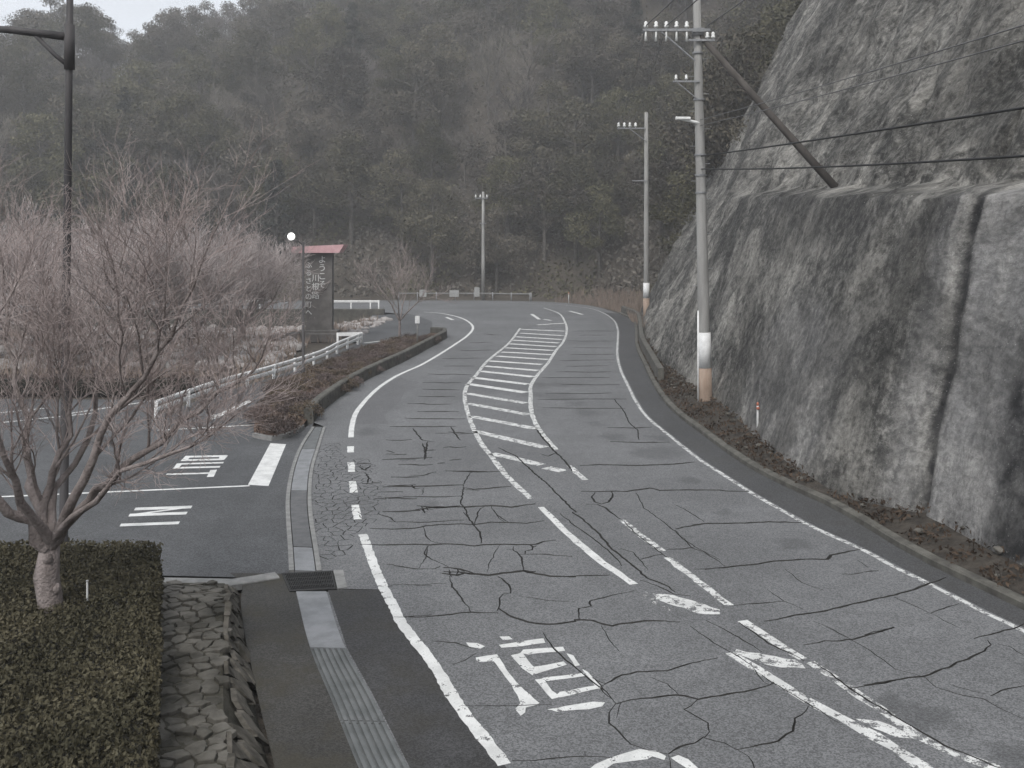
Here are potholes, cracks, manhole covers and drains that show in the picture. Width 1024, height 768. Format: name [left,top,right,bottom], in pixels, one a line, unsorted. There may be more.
crack [309,334,1024,768]
drain grate [282,570,336,592]
